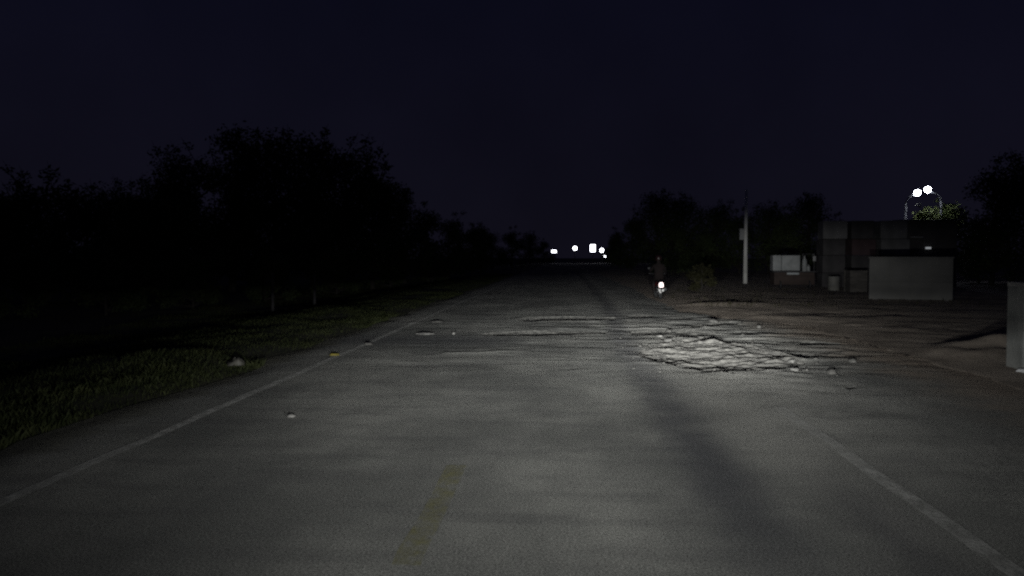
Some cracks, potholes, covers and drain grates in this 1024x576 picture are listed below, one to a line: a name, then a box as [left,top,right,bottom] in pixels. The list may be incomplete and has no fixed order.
pothole [639,338,806,373]
